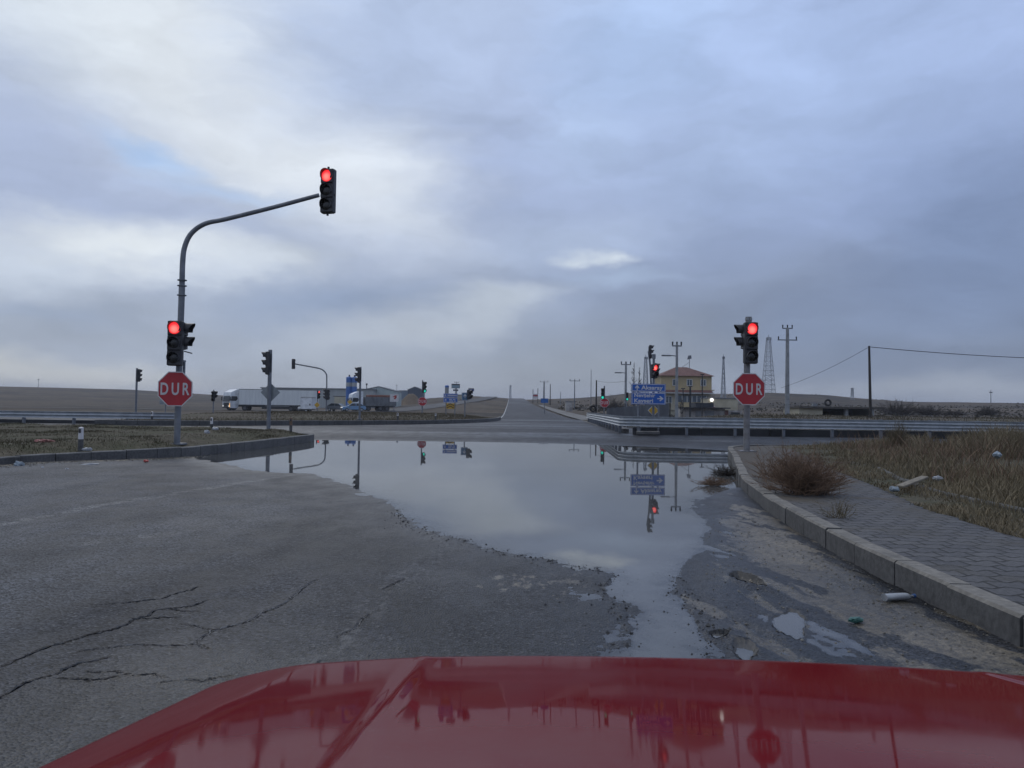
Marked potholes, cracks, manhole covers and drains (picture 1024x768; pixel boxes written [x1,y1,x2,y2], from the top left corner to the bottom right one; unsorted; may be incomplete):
pothole [730,570,767,586]
pothole [733,637,758,660]
crack [0,581,314,697]
pothole [772,608,806,640]
